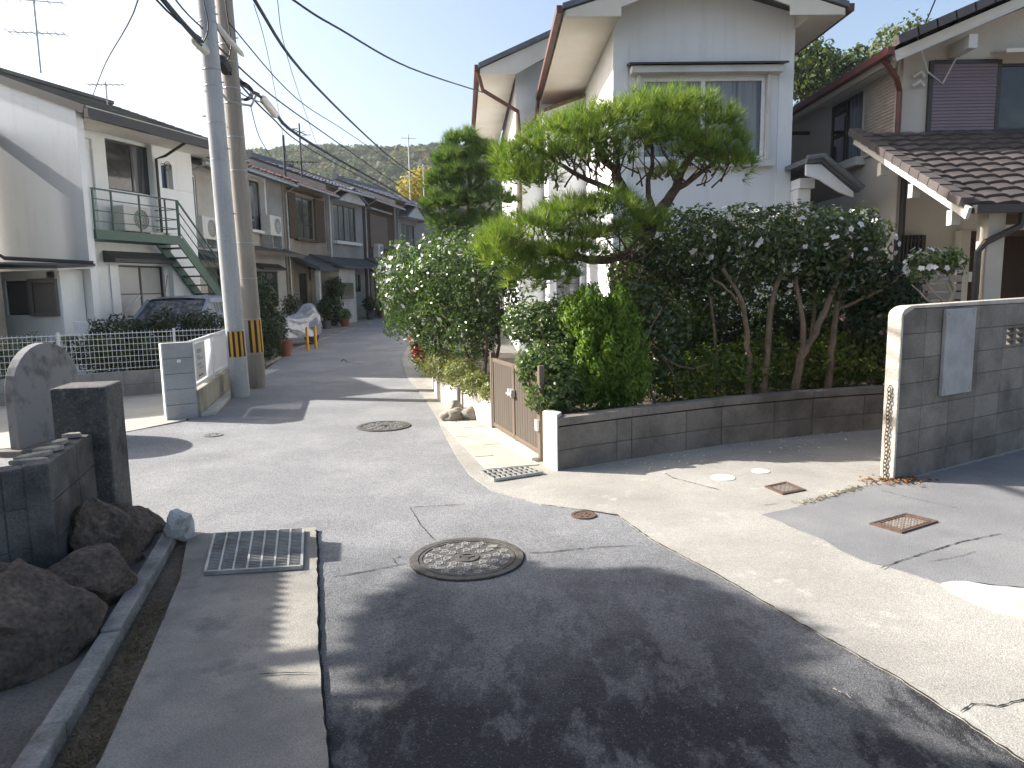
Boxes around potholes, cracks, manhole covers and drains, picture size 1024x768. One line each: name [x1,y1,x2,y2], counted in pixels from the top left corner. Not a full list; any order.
drain grate [480,466,543,482]
crack [881,533,1001,568]
manhole cover [410,537,525,582]
drain grate [204,527,305,575]
utility cover [571,511,596,520]
manhole cover [357,421,411,432]
crack [960,698,1024,712]
